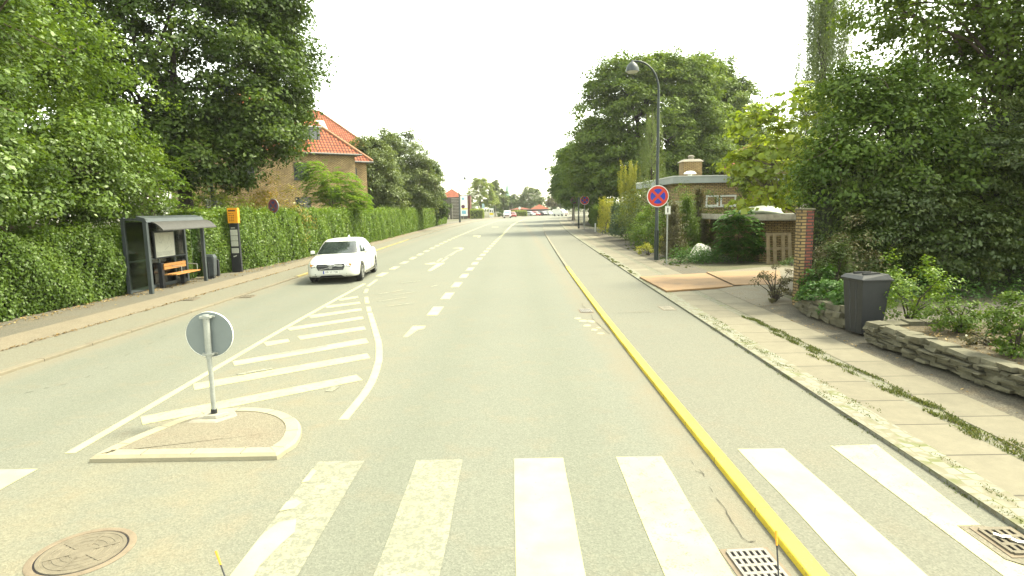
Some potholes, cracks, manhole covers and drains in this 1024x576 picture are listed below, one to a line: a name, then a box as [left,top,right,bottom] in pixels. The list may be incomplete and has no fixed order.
drain grate [719,547,792,576]
manhole cover [22,527,137,576]
drain grate [957,525,1024,565]
